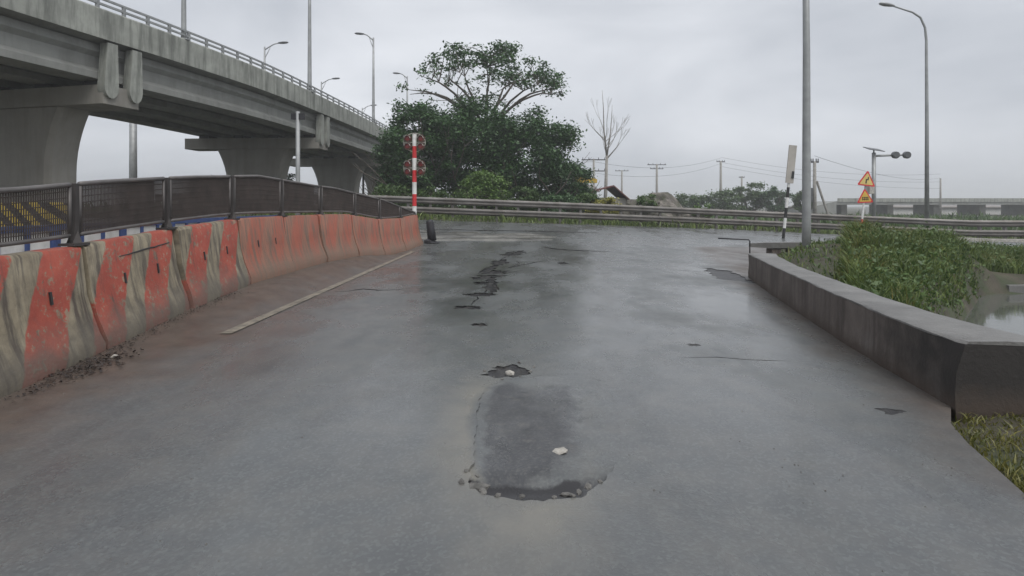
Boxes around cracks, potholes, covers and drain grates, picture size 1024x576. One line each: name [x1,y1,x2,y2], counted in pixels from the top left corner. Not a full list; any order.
crack [437,229,608,305]
pothole [482,364,531,378]
pothole [705,268,754,283]
